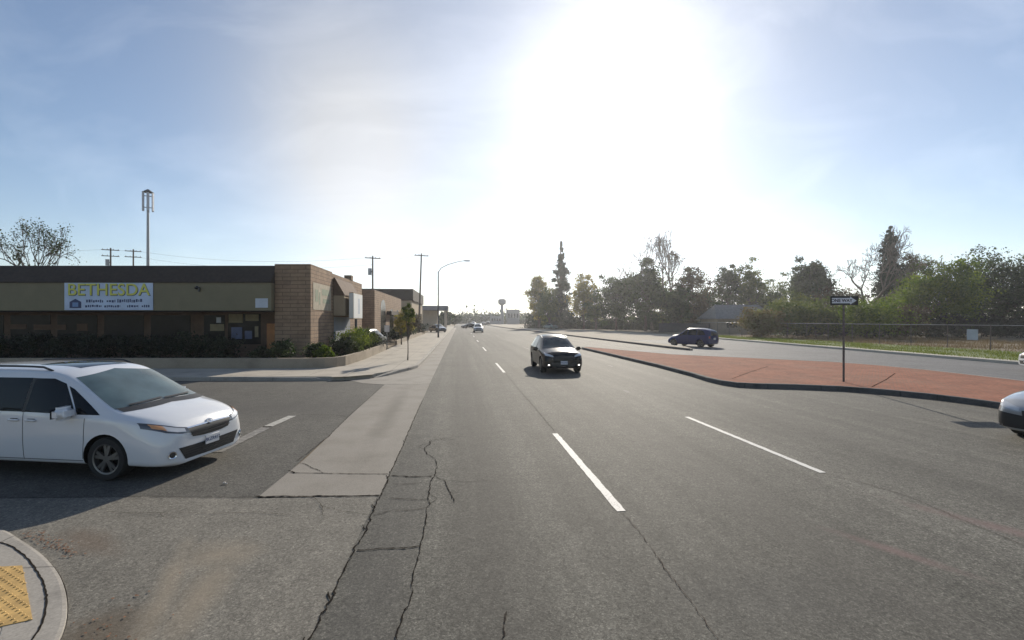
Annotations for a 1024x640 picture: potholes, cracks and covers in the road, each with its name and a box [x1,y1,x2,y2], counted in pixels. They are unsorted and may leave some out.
crack [622,512,718,638]
crack [108,438,491,640]
